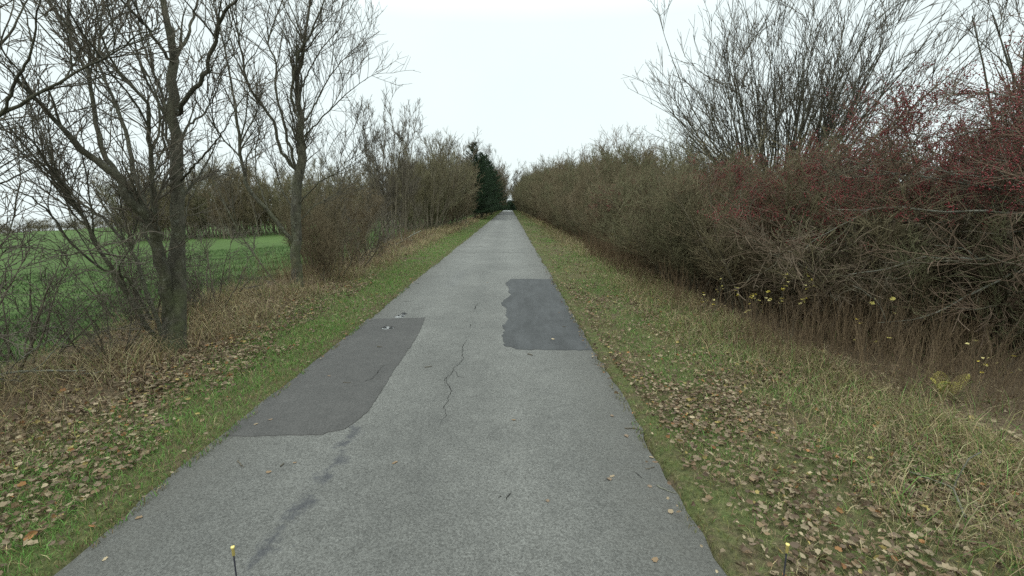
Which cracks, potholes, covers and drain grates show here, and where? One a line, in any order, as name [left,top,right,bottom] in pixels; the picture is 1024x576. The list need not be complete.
crack [438,306,476,427]
